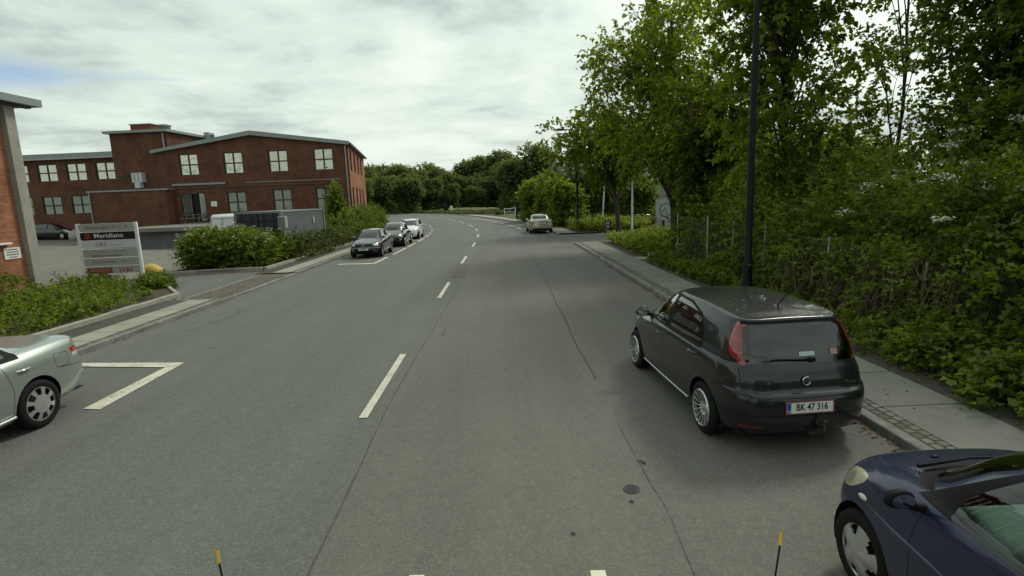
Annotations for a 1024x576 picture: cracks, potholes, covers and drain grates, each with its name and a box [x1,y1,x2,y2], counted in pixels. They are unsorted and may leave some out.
manhole cover [623,484,640,494]
